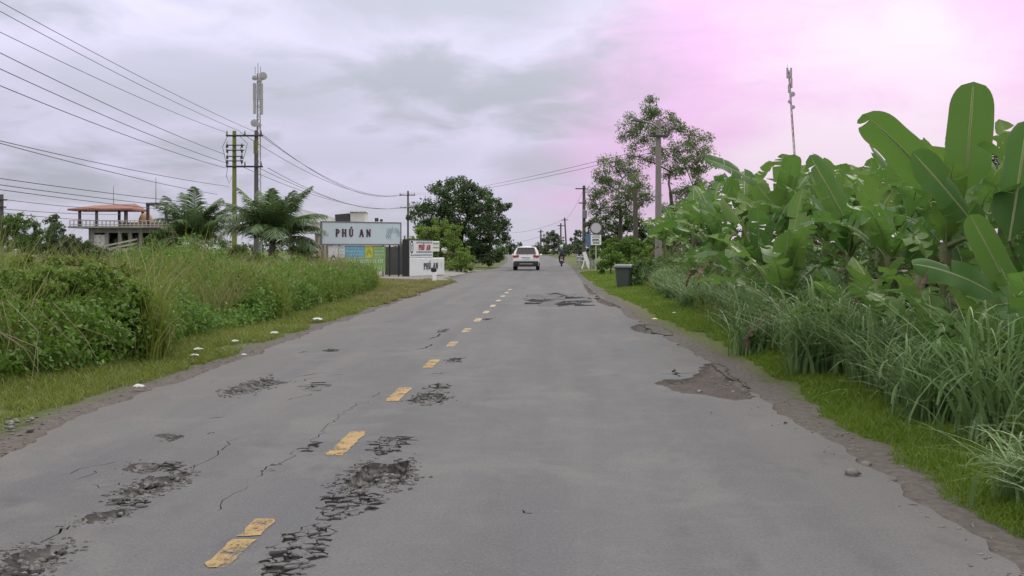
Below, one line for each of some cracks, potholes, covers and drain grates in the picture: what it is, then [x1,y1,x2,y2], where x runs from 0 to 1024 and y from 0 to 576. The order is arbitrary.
crack [220,394,378,510]
pothole [98,464,202,504]
pothole [153,431,184,443]
pothole [0,537,92,576]
pothole [215,374,296,398]
pothole [53,505,144,529]
pothole [321,453,433,495]
crack [70,462,152,508]
pothole [115,459,168,479]
pothole [401,390,458,406]
pothole [654,363,757,401]
pothole [631,324,674,336]
